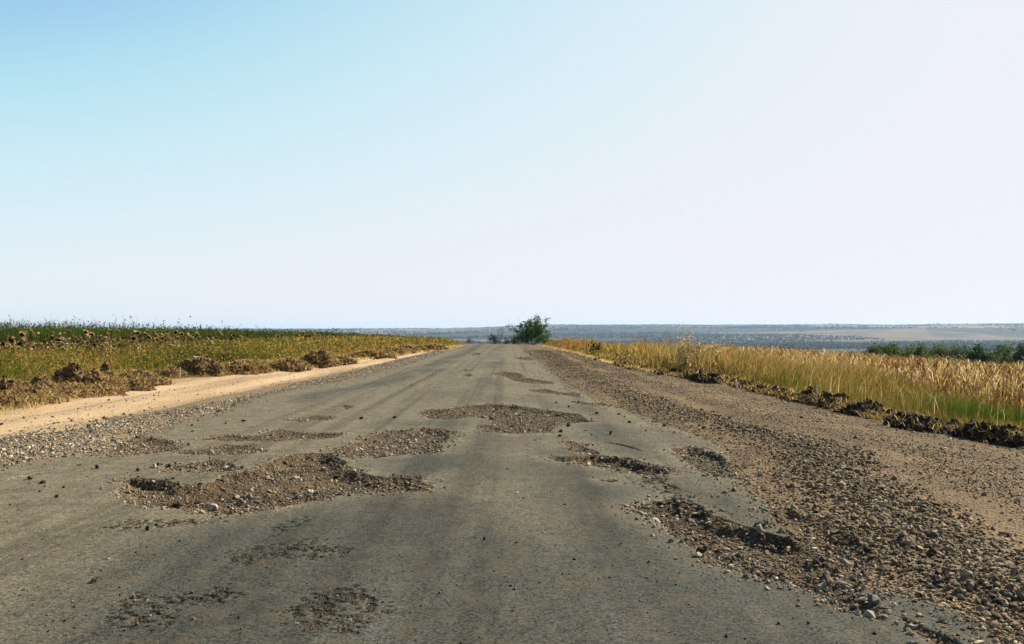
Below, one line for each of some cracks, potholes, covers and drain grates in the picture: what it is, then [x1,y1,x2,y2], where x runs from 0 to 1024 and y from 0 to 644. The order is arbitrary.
pothole [319,426,470,460]
pothole [192,428,352,443]
pothole [278,585,395,637]
pothole [547,440,603,457]
pothole [415,403,597,434]
pothole [97,452,446,520]
pothole [663,445,751,479]
pothole [540,452,687,477]
pothole [103,584,246,633]
pothole [490,371,526,381]
pothole [213,538,354,568]
